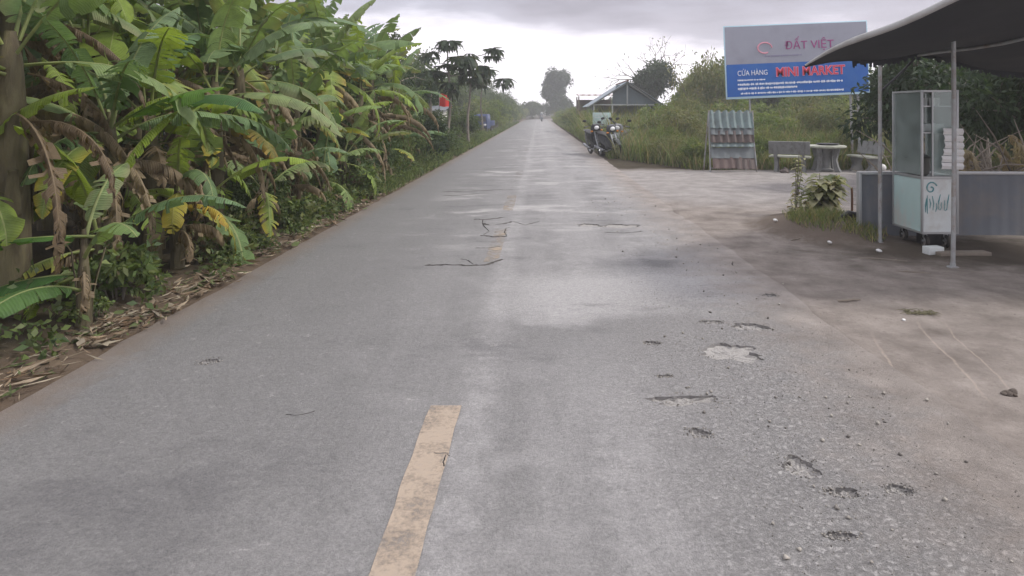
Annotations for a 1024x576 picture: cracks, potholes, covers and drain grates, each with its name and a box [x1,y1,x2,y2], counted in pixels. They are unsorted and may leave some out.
crack [425,217,539,266]
pothole [644,395,718,406]
pothole [826,487,860,498]
pothole [884,484,915,496]
pothole [826,532,857,540]
pothole [781,455,821,478]
pothole [688,427,711,438]
pothole [732,323,771,331]
